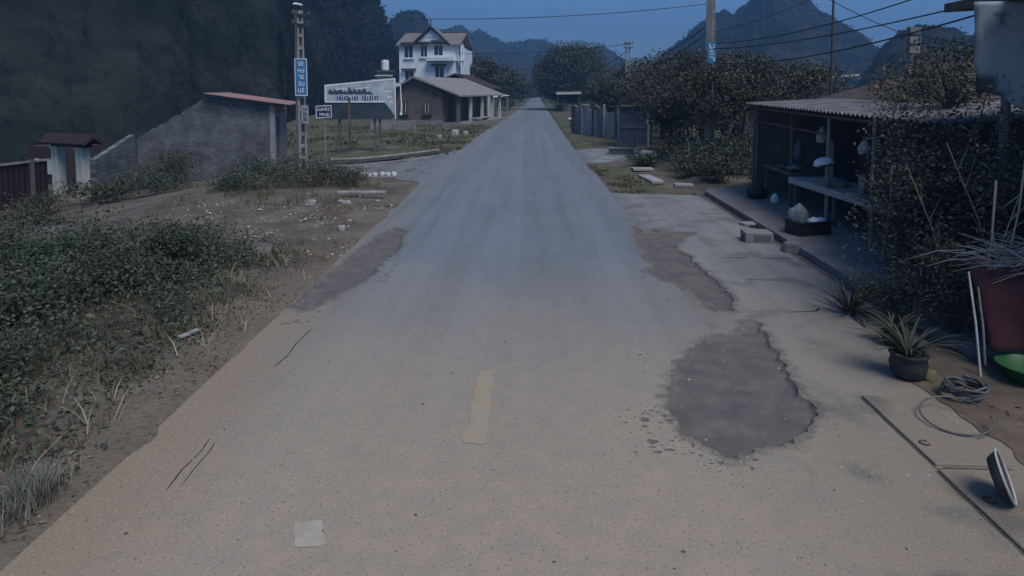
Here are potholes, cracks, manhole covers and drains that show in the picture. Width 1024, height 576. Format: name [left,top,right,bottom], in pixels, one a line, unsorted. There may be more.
crack [167,438,215,490]
